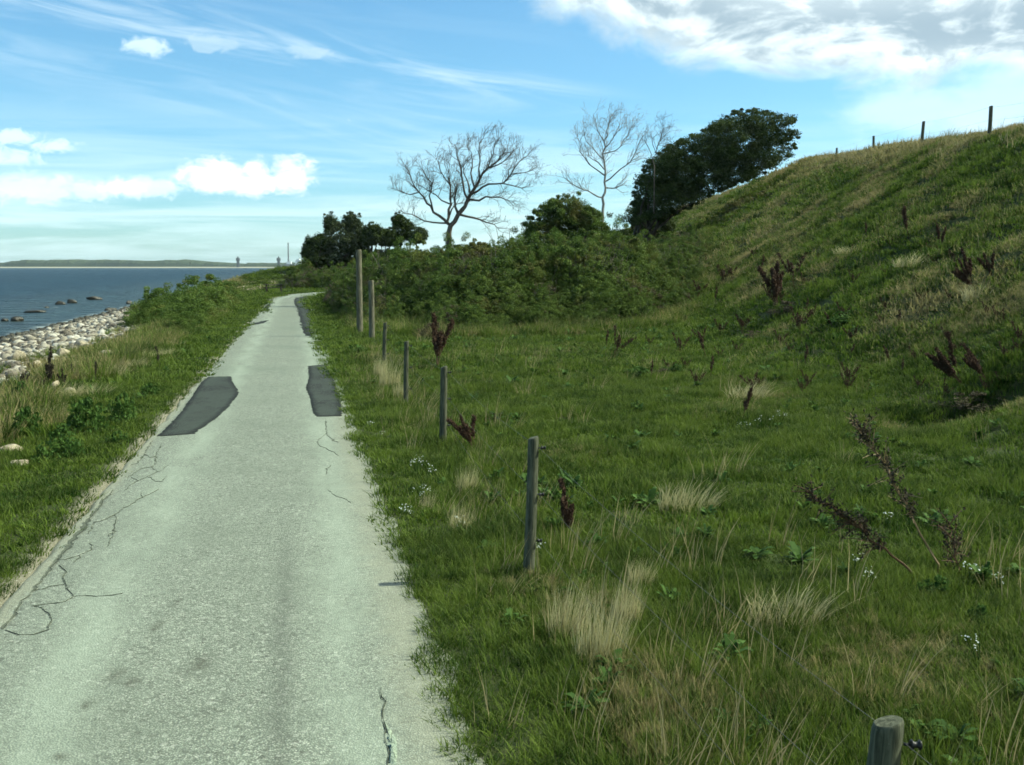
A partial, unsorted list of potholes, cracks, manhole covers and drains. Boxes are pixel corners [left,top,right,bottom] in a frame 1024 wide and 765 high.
crack [1,443,168,635]
crack [379,691,397,765]
